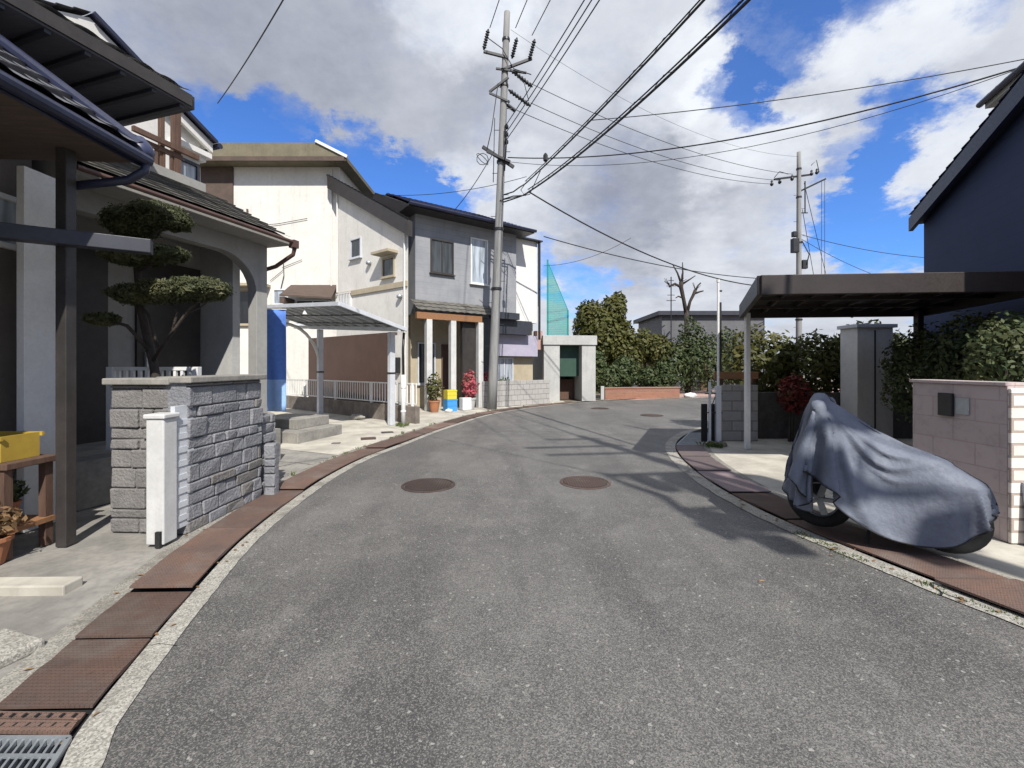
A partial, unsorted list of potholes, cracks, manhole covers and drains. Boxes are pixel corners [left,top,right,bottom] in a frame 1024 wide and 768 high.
manhole cover [560,476,611,490]
manhole cover [401,478,455,493]
drain grate [0,735,72,768]
